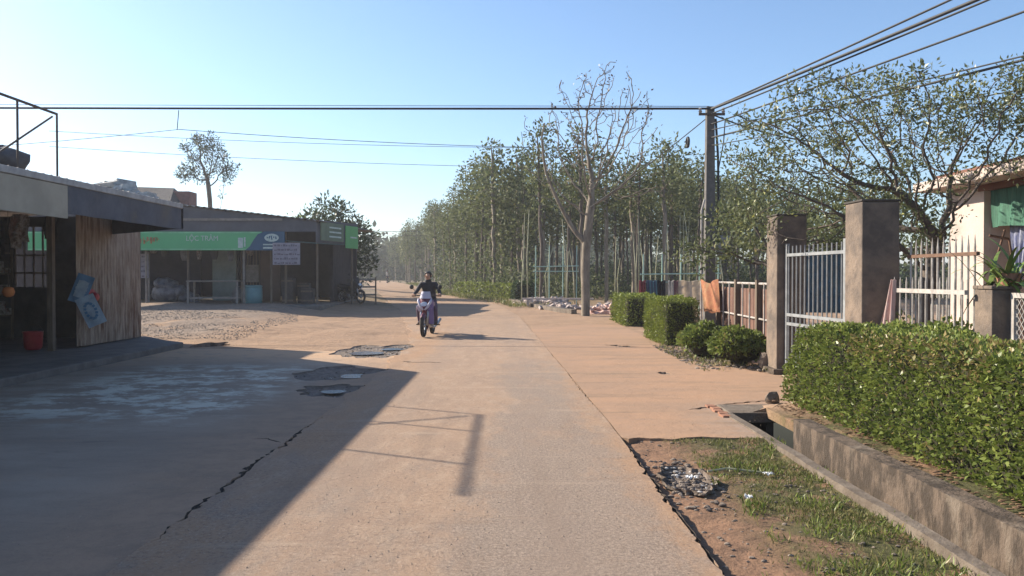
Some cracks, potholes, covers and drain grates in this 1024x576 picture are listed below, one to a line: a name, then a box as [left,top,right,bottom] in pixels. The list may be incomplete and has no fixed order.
pothole [292,365,386,381]
pothole [329,345,415,358]
crack [160,426,309,539]
pothole [295,384,363,398]
